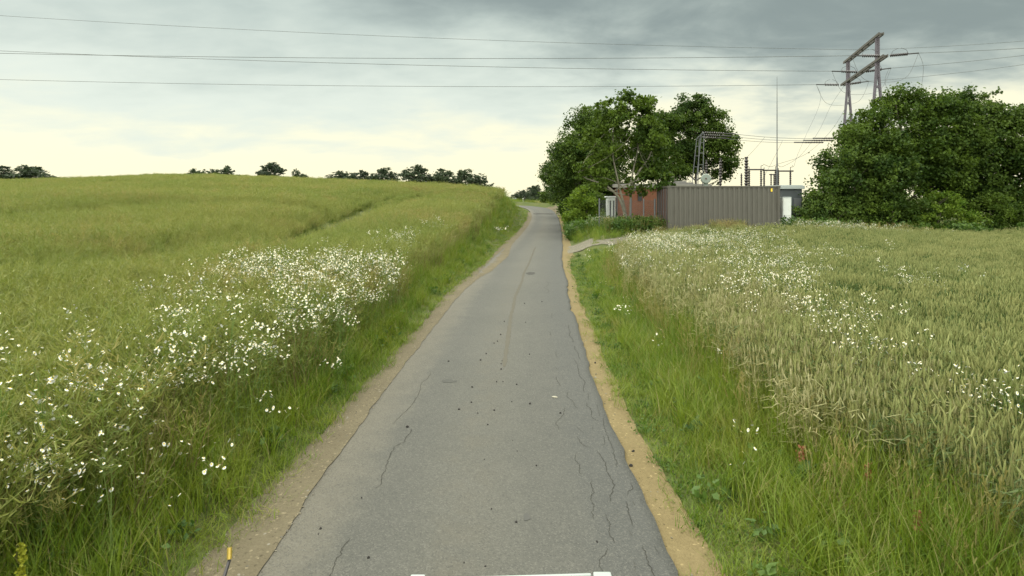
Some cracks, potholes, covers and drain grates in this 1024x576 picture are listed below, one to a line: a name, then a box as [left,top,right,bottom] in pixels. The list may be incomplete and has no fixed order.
crack [551,313,655,576]
